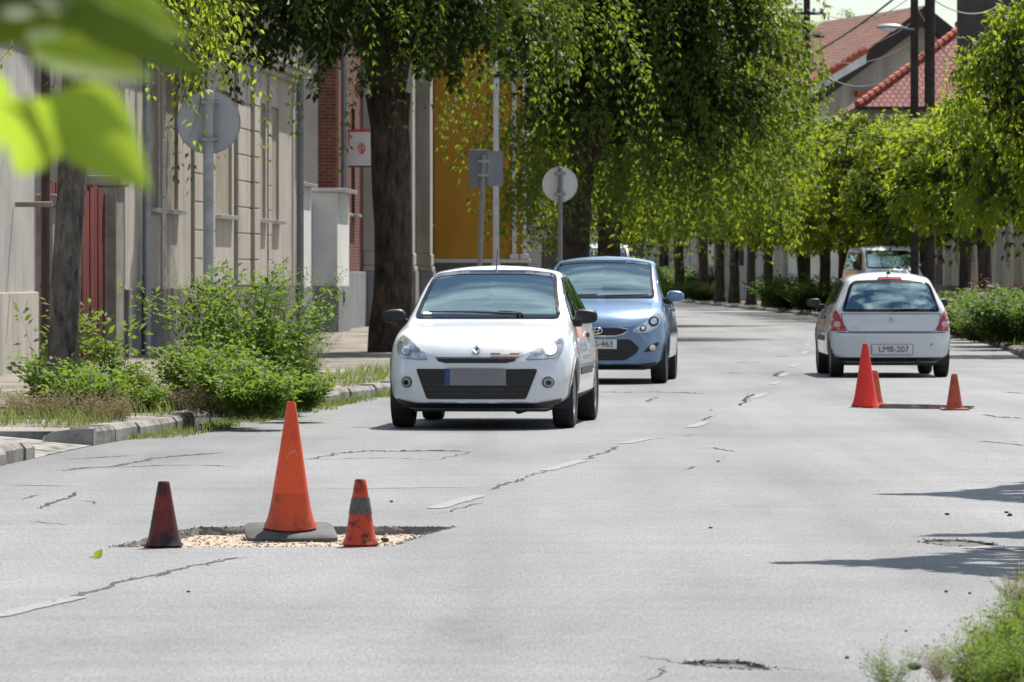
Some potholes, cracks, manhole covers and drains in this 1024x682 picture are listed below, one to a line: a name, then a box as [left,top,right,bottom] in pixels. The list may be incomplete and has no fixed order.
pothole [108,526,457,547]
pothole [678,658,779,670]
pothole [917,538,1024,549]
crack [18,452,236,525]
crack [622,392,713,421]
